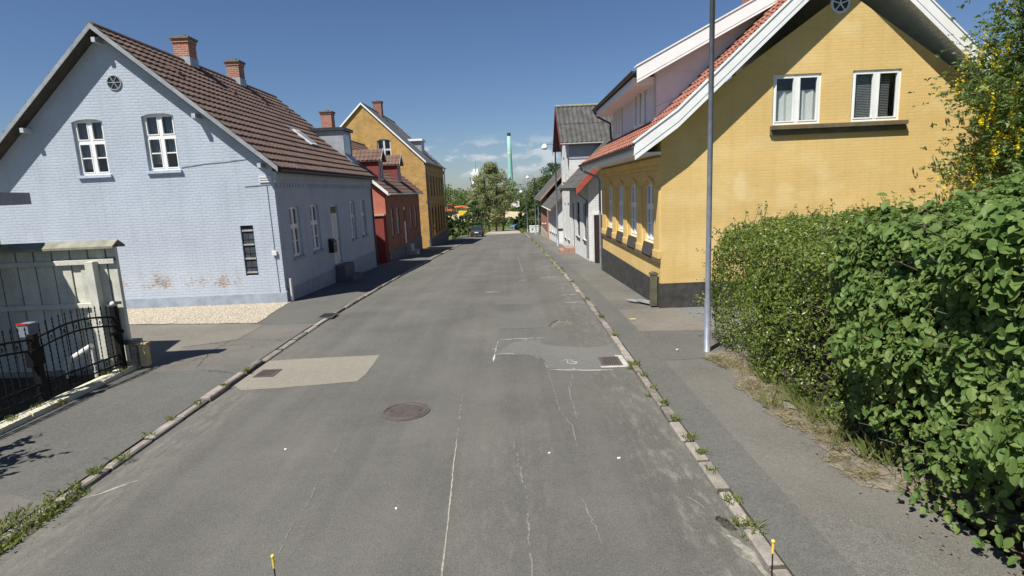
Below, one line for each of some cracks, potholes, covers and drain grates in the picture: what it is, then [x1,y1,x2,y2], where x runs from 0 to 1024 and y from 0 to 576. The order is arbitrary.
crack [548,371,603,544]
drain grate [598,356,623,366]
drain grate [253,369,282,378]
pothole [715,516,738,531]
pothole [548,319,572,327]
manhole cover [382,402,430,421]
crack [441,394,463,576]
crack [265,441,341,576]
crack [513,442,533,576]
